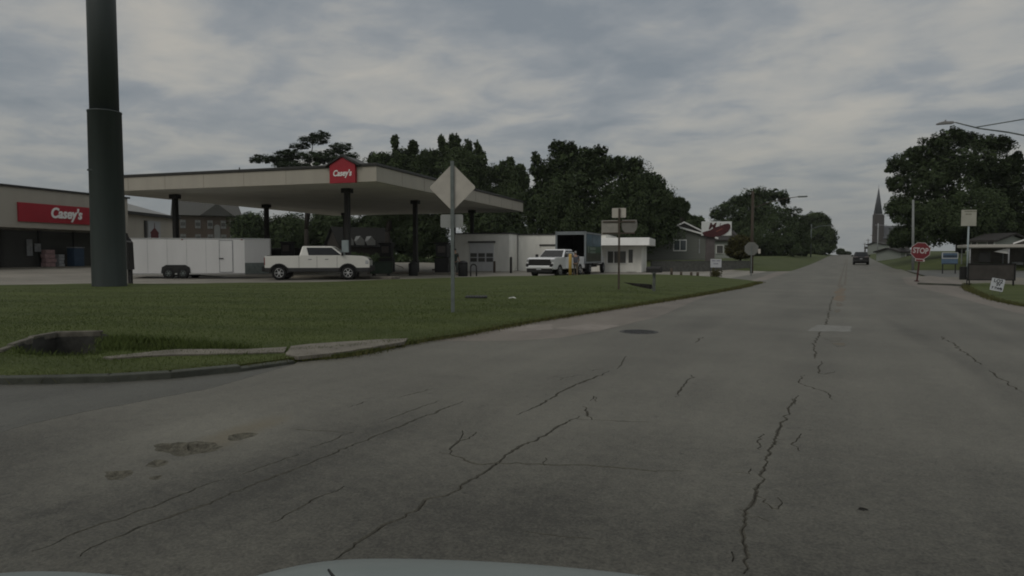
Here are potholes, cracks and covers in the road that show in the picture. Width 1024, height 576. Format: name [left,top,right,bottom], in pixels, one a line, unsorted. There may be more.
crack [941,336,1020,391]
crack [731,297,834,574]
crack [34,356,680,561]
